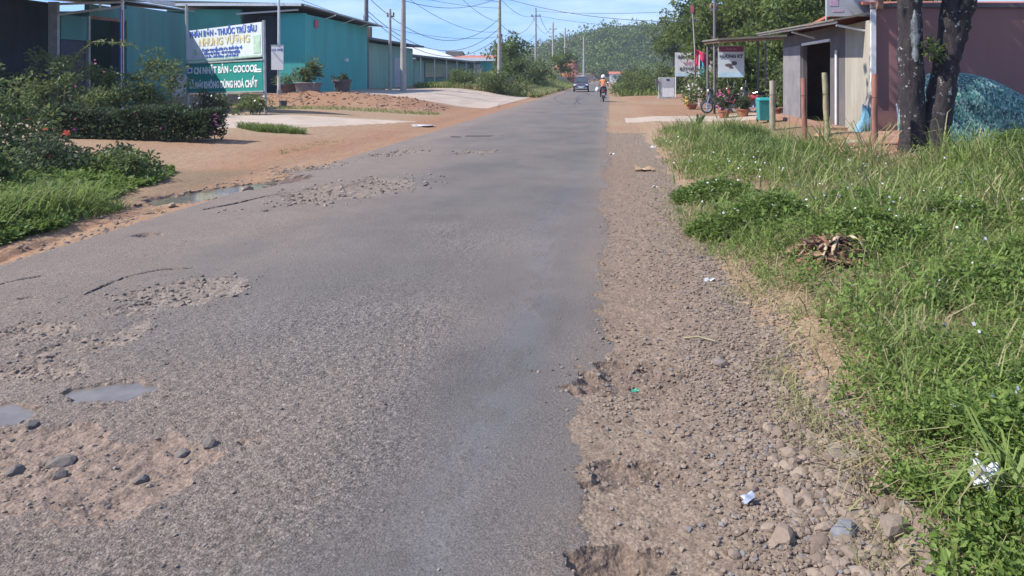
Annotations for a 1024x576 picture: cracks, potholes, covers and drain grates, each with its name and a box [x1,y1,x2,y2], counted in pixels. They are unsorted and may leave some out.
pothole [0,421,268,529]
pothole [0,401,46,433]
pothole [134,175,316,208]
pothole [0,321,82,342]
pothole [60,379,163,403]
pothole [95,277,250,316]
pothole [13,318,152,370]
pothole [0,361,90,382]
crack [204,168,328,210]
crack [84,267,189,295]
pothole [232,178,418,212]
